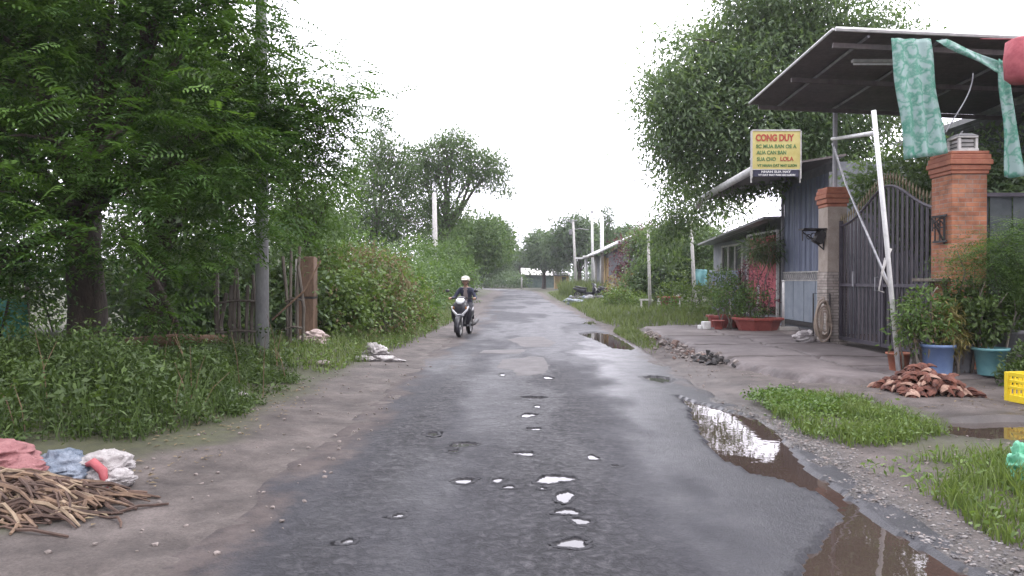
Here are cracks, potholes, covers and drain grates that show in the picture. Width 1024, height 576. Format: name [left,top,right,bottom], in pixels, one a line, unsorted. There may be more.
pothole [549,506,586,516]
pothole [547,535,594,550]
pothole [423,430,442,438]
pothole [532,473,583,485]
pothole [448,476,480,485]
pothole [387,511,409,519]
pothole [550,489,579,505]
pothole [334,536,359,546]
pothole [639,375,677,383]
pothole [584,453,604,461]
pothole [488,476,508,484]
pothole [566,516,596,526]
